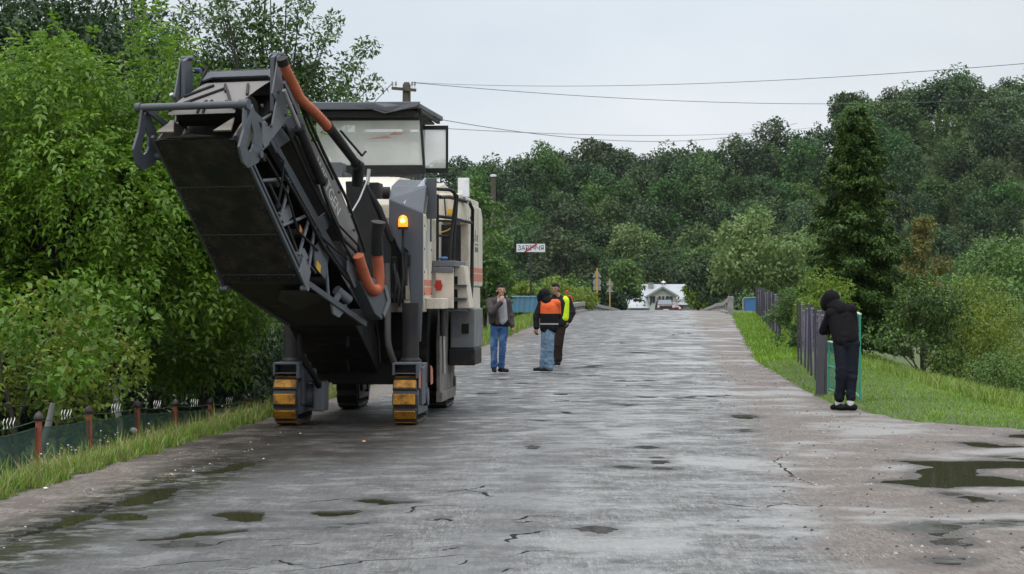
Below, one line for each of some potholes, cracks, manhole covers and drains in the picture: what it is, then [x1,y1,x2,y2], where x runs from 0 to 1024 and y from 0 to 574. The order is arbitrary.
pothole [572,526,619,534]
pothole [878,460,1024,489]
crack [709,455,815,507]
crack [135,538,467,572]
crack [501,516,556,573]
pothole [111,485,184,507]
pothole [211,510,268,523]
crack [407,485,494,521]
